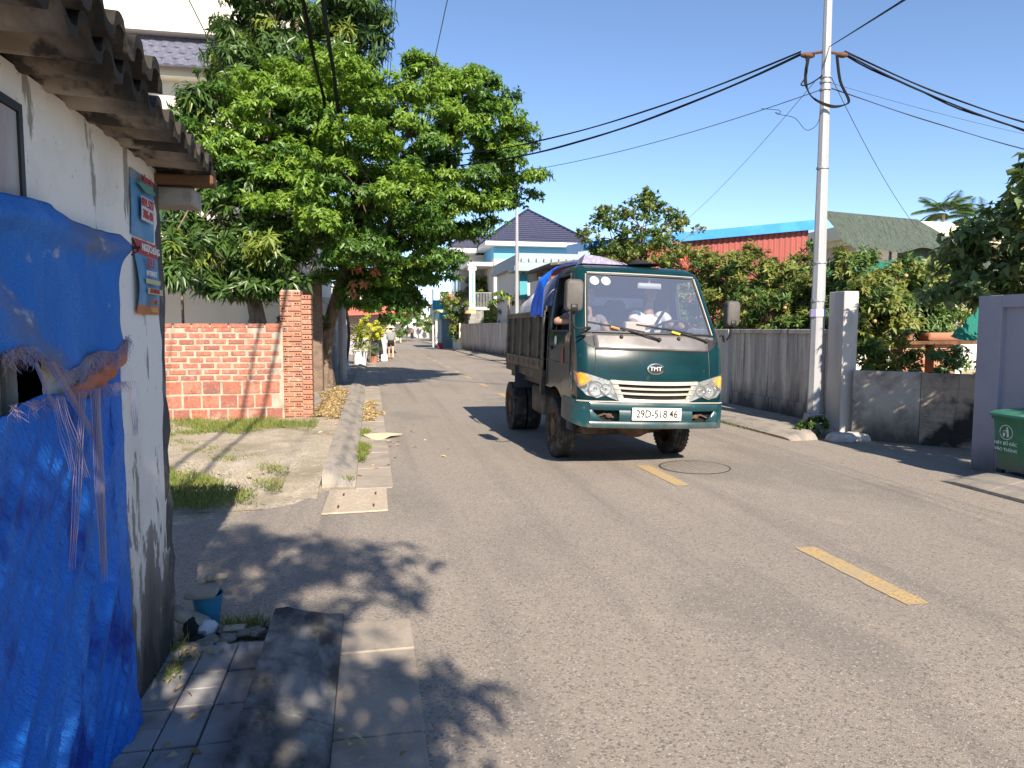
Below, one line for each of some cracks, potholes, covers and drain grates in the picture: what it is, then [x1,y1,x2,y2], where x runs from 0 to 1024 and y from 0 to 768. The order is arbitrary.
manhole cover [659,460,731,474]
manhole cover [321,488,388,515]
